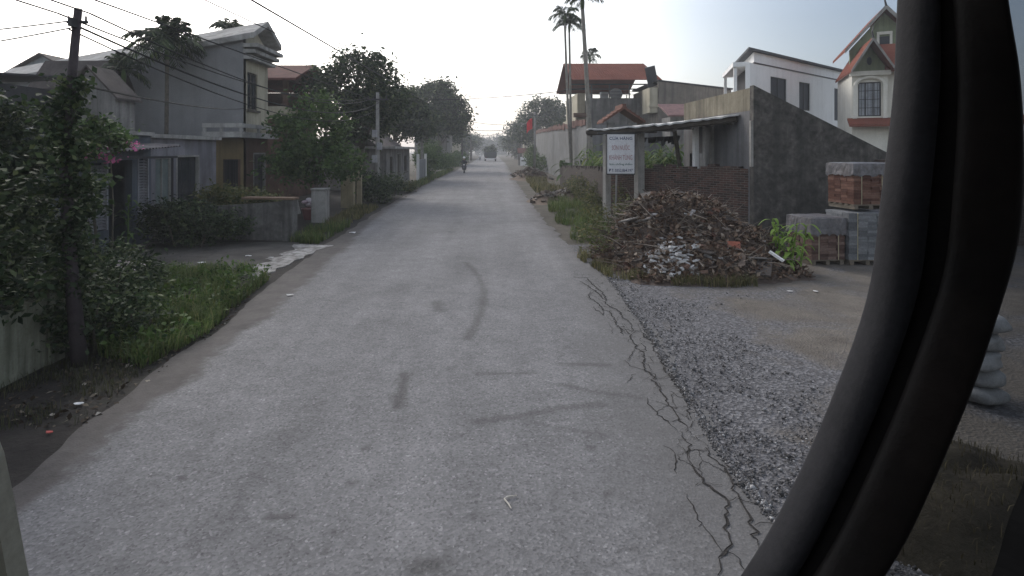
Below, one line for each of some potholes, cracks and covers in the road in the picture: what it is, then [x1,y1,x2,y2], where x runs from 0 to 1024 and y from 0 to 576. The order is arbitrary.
crack [574,272,770,575]
